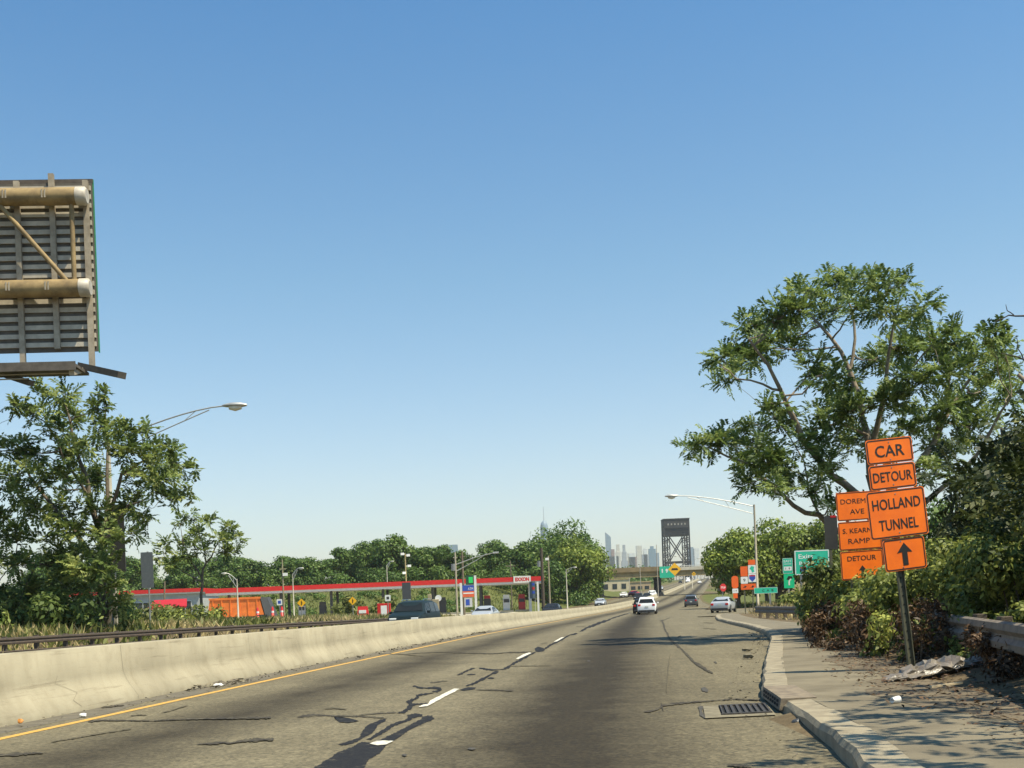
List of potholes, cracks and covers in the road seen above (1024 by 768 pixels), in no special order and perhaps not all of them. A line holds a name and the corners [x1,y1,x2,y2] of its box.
drain grate [703,685,817,718]
crack [645,617,760,712]
